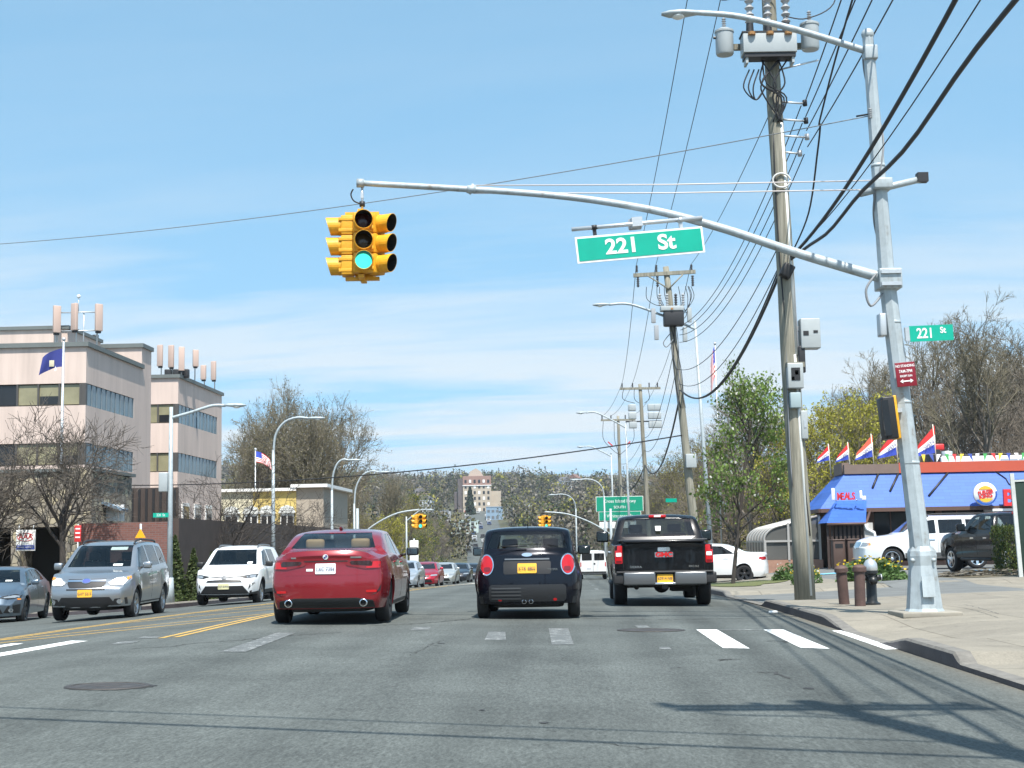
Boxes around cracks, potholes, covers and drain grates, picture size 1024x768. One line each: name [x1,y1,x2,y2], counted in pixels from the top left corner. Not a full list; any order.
manhole cover [64,682,158,690]
